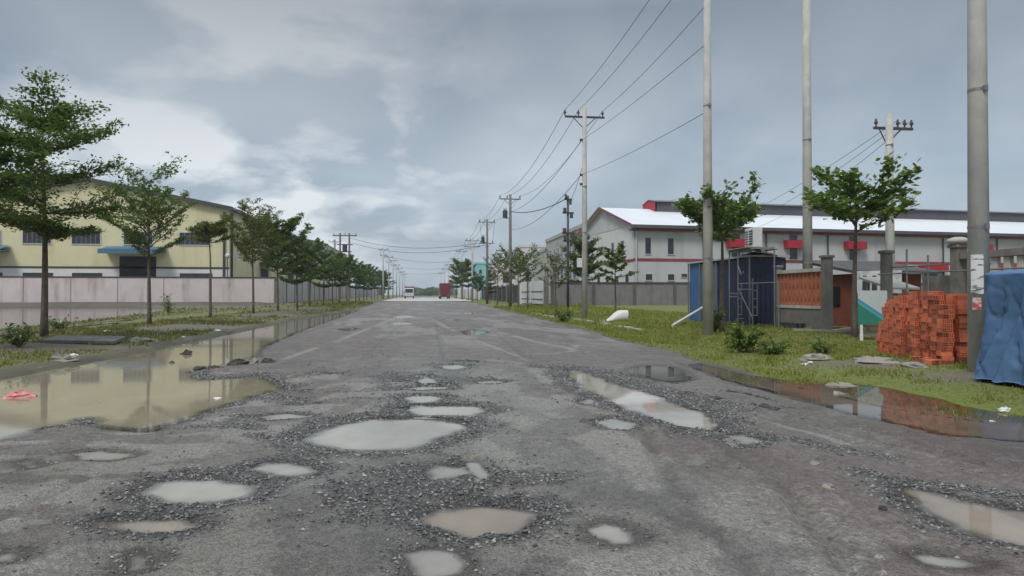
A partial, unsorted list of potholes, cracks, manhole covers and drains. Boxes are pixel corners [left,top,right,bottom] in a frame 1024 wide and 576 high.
pothole [262,410,505,458]
pothole [378,452,524,490]
pothole [217,450,363,481]
pothole [88,464,315,510]
pothole [374,399,518,419]
pothole [356,482,583,549]
